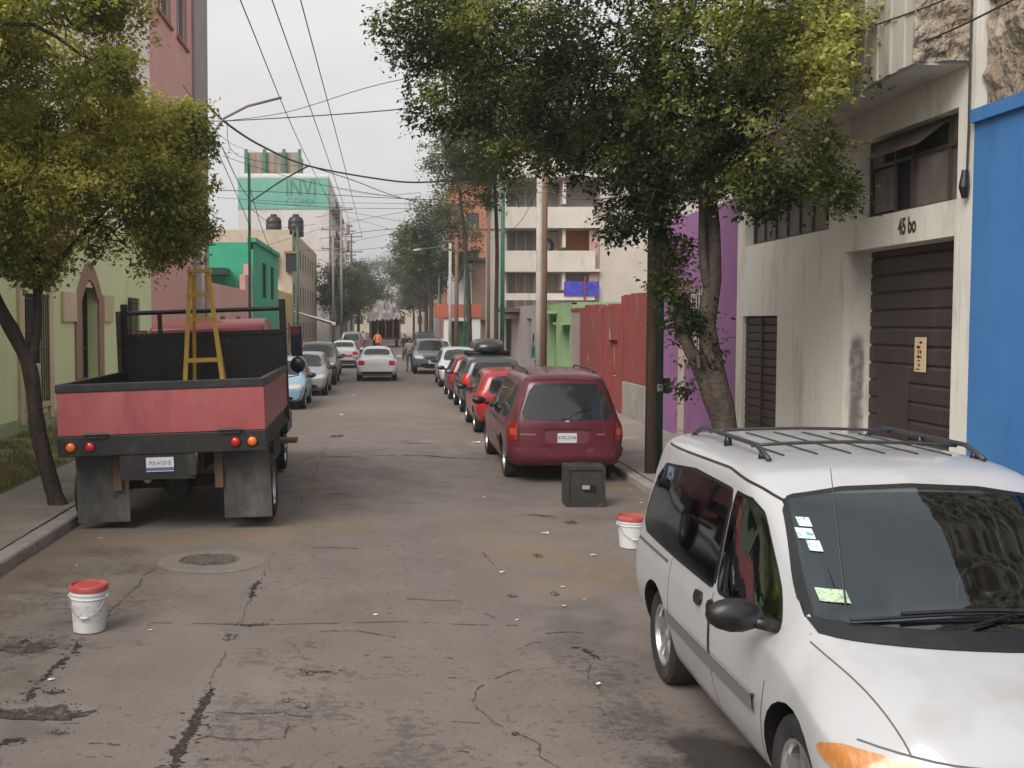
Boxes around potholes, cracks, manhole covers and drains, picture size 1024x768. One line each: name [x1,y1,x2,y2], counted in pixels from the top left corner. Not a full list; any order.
crack [159,687,312,768]
crack [441,668,559,768]
manhole cover [158,550,267,573]
crack [108,565,156,616]
crack [525,631,600,690]
